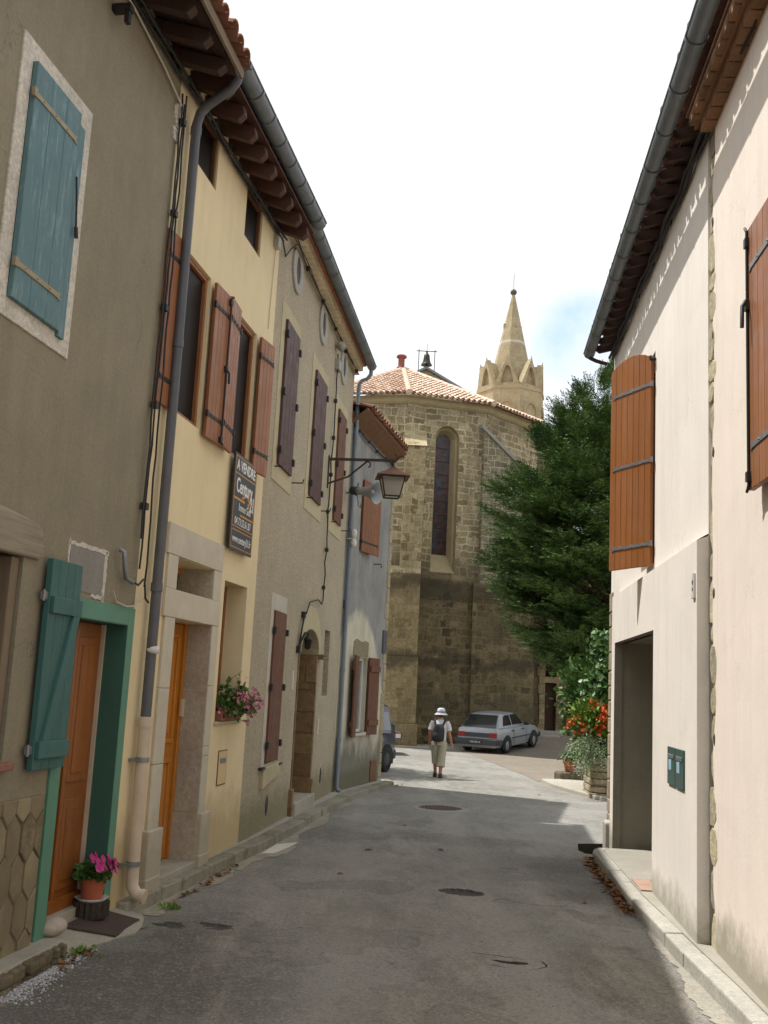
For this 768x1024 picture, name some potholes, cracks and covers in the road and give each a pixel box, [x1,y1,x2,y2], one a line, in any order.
manhole cover [411,804,471,812]
